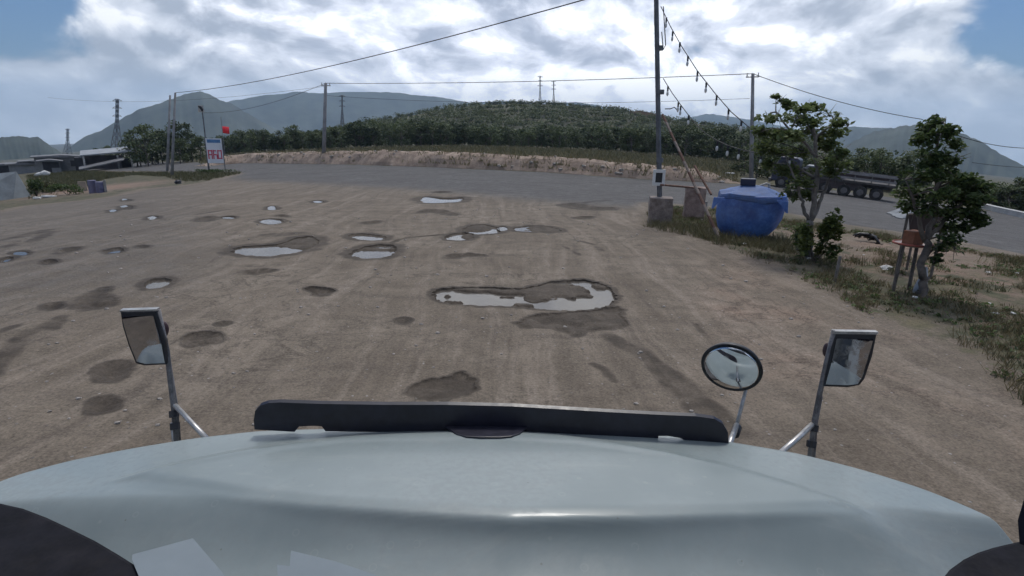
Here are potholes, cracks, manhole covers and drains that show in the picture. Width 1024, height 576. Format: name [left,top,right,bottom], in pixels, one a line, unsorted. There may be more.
pothole [349,233,386,241]
pothole [305,286,336,296]
pothole [350,244,397,259]
pothole [462,224,502,234]
pothole [143,278,172,289]
pothole [432,279,618,311]
pothole [405,371,478,401]
pothole [85,395,123,414]
pothole [90,360,136,382]
pothole [181,331,224,347]
pothole [444,232,474,240]
pothole [516,306,629,336]
